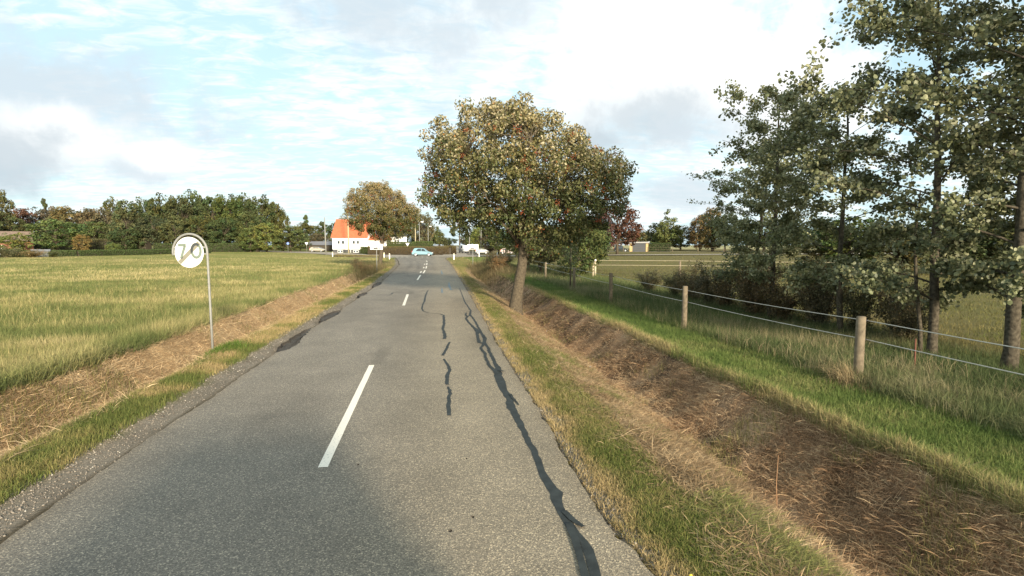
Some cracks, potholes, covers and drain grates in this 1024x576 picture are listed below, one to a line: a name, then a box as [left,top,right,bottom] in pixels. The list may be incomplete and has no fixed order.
pothole [319,310,341,322]
pothole [275,328,311,353]
